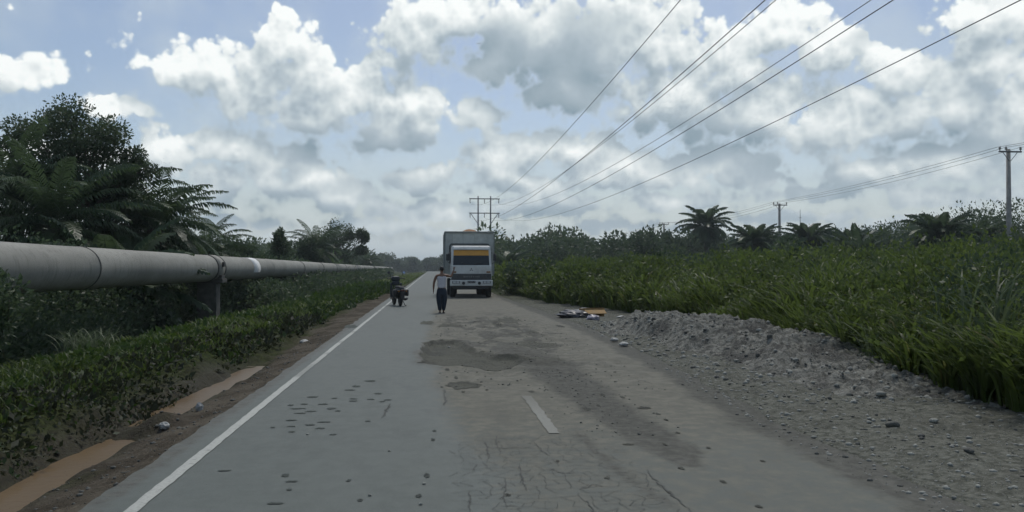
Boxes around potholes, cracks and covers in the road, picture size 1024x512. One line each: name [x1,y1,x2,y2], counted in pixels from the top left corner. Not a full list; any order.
crack [450,434,692,512]
